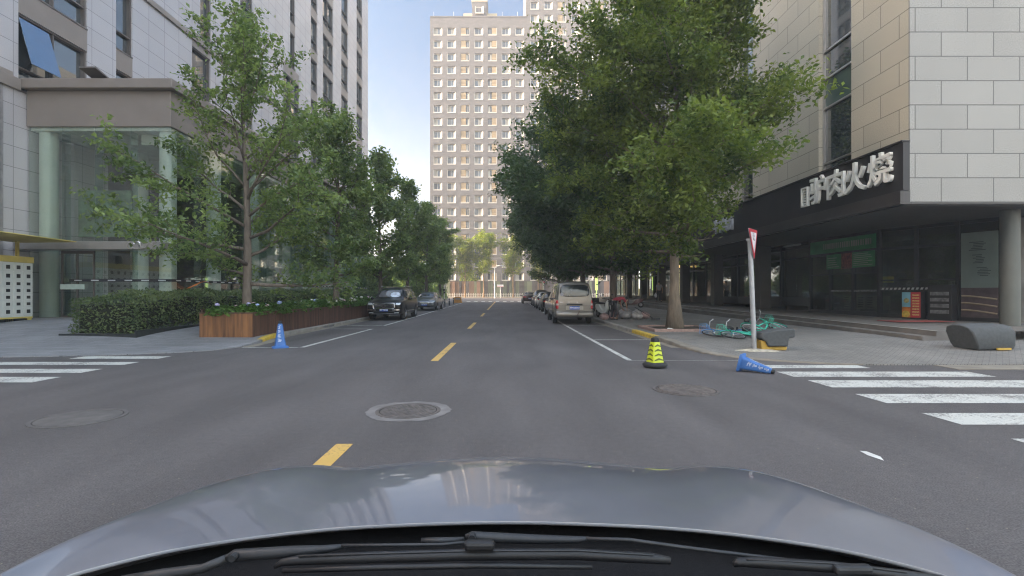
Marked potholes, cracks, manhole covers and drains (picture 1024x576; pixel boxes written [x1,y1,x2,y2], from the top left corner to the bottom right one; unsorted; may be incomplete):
manhole cover [365,401,452,422]
manhole cover [653,384,720,397]
manhole cover [25,408,129,429]
